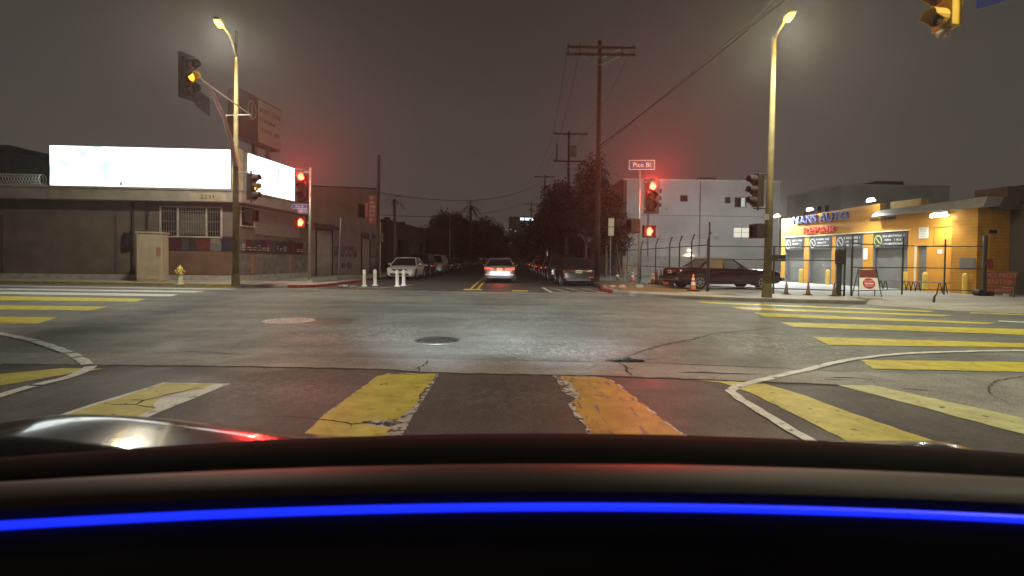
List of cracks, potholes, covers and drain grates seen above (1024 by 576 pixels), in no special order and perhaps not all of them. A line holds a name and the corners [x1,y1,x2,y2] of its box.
crack [105,385,203,408]
crack [619,328,771,376]
crack [283,416,408,428]
